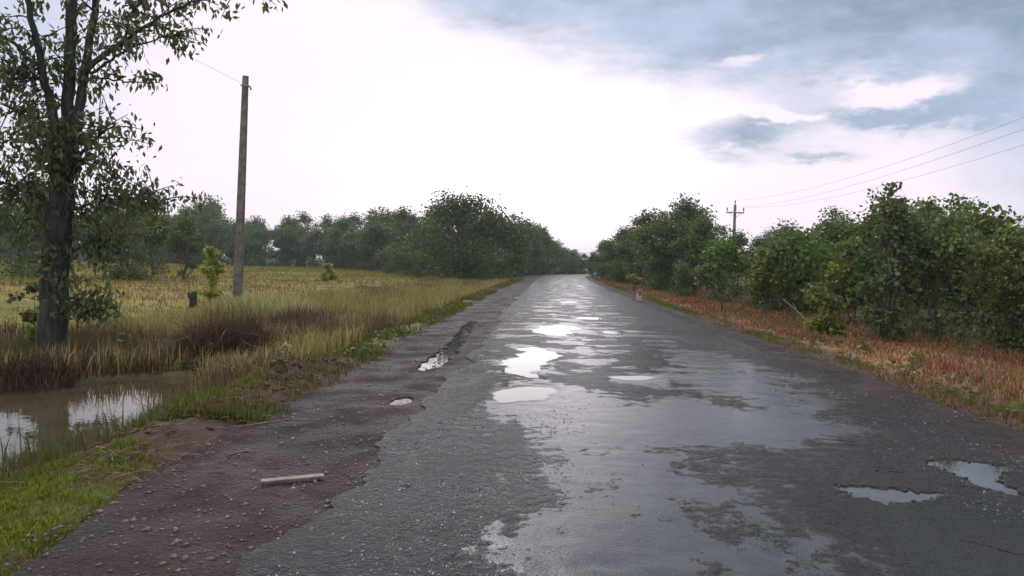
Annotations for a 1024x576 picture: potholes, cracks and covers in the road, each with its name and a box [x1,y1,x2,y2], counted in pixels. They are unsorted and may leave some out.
pothole [418,321,478,371]
pothole [832,483,952,506]
crack [959,540,1023,555]
pothole [389,396,415,405]
pothole [925,457,1024,496]
